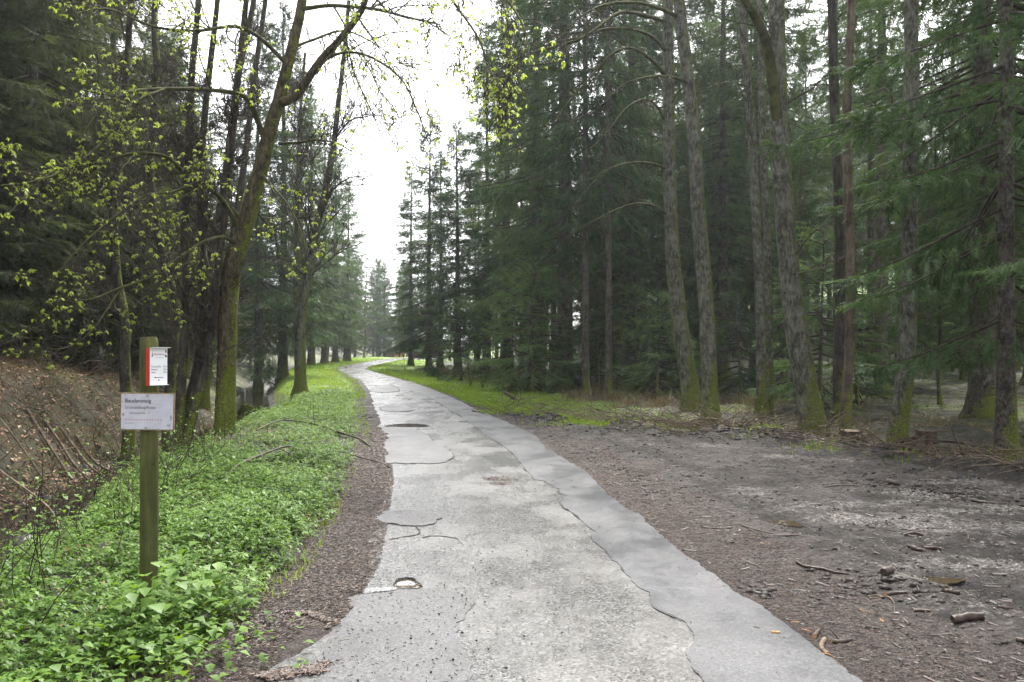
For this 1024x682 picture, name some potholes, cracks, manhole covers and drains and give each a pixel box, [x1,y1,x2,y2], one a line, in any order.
pothole [393,577,423,589]
